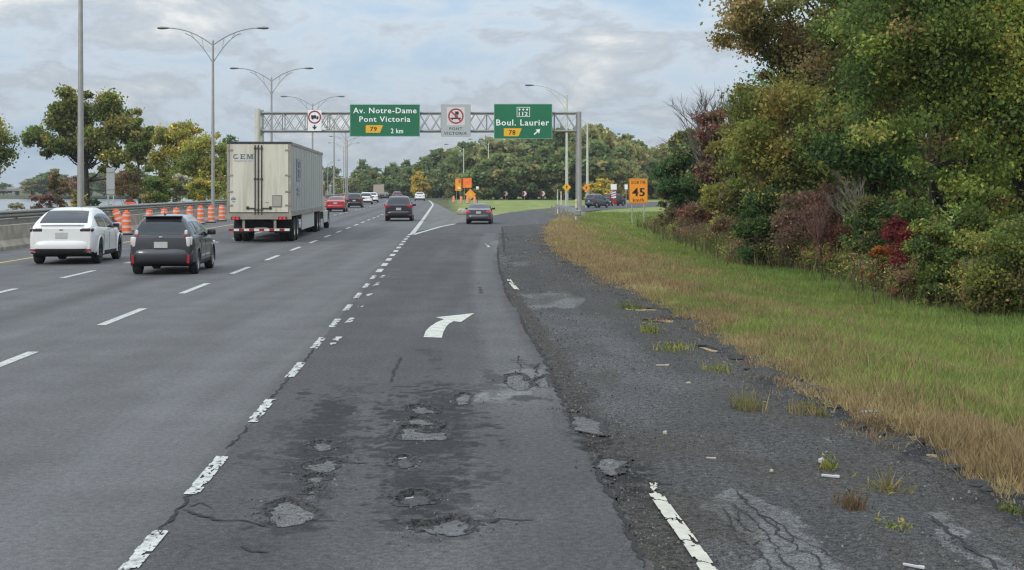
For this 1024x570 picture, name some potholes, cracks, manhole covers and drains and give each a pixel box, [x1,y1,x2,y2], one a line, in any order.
pothole [389,487,443,507]
pothole [451,392,474,405]
pothole [503,372,536,391]
pothole [407,403,443,414]
pothole [257,496,325,527]
pothole [398,512,482,537]
pothole [297,456,345,473]
crack [723,489,850,570]
crack [183,502,270,527]
pothole [564,413,610,437]
pothole [589,454,635,477]
pothole [385,453,422,468]
